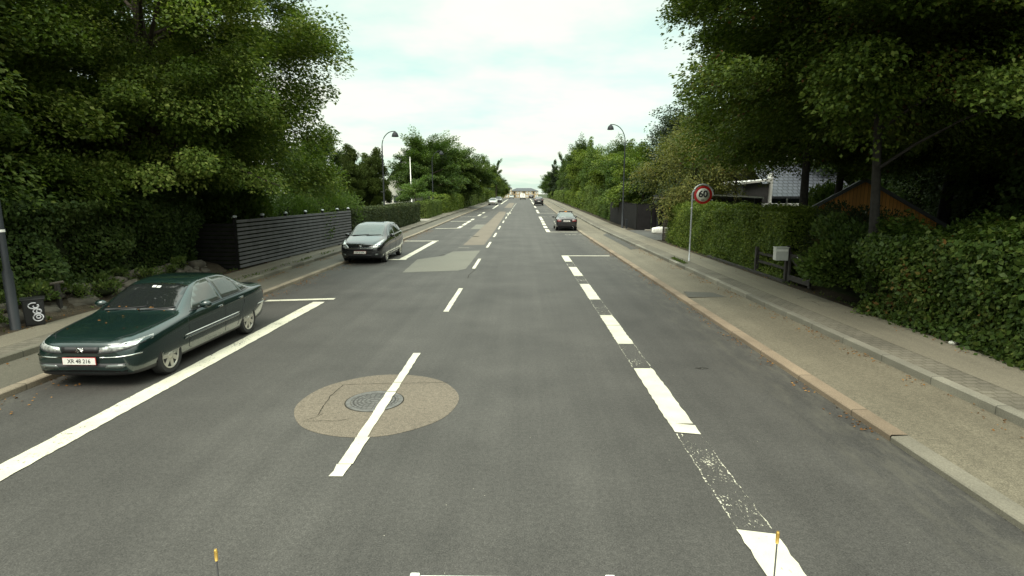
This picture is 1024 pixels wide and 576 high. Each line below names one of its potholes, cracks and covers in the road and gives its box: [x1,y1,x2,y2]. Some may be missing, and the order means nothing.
crack [307,382,442,421]
manhole cover [344,391,404,412]
